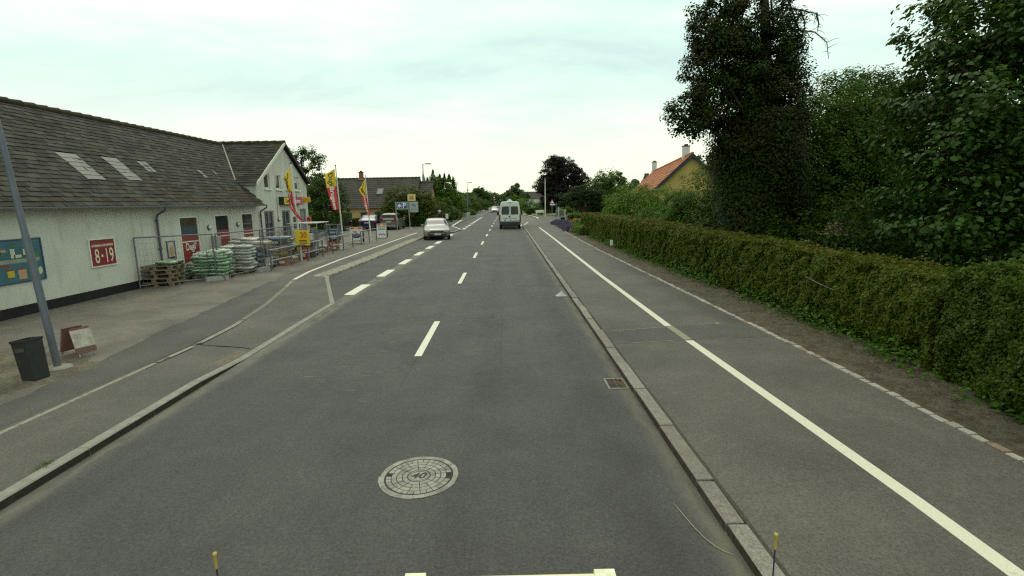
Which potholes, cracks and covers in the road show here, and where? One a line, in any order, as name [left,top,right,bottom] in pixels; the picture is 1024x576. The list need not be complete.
manhole cover [378,457,459,499]
drain grate [603,378,630,389]
